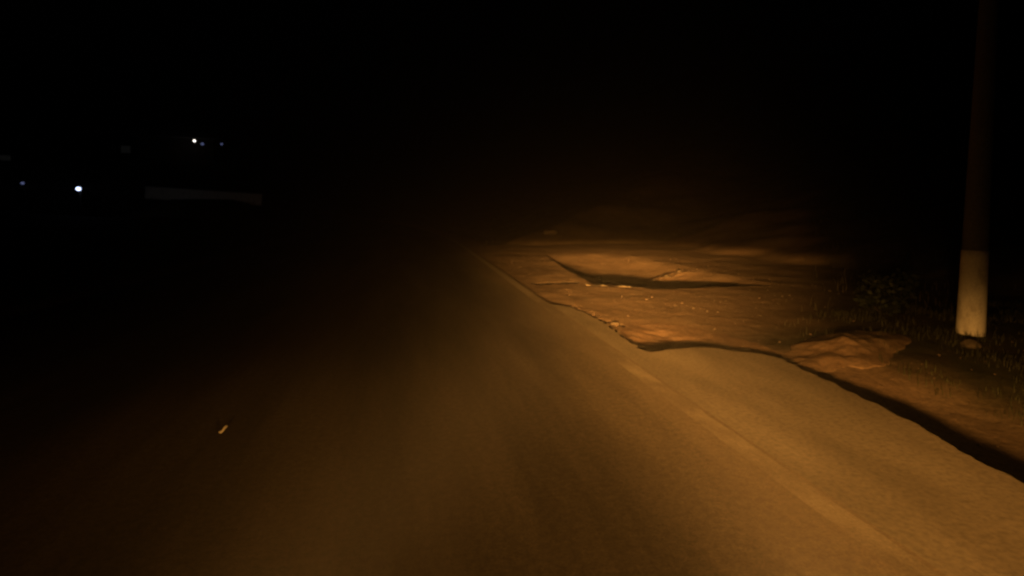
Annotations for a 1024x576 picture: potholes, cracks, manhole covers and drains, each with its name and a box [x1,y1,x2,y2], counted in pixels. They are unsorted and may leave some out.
pothole [550,259,738,289]
